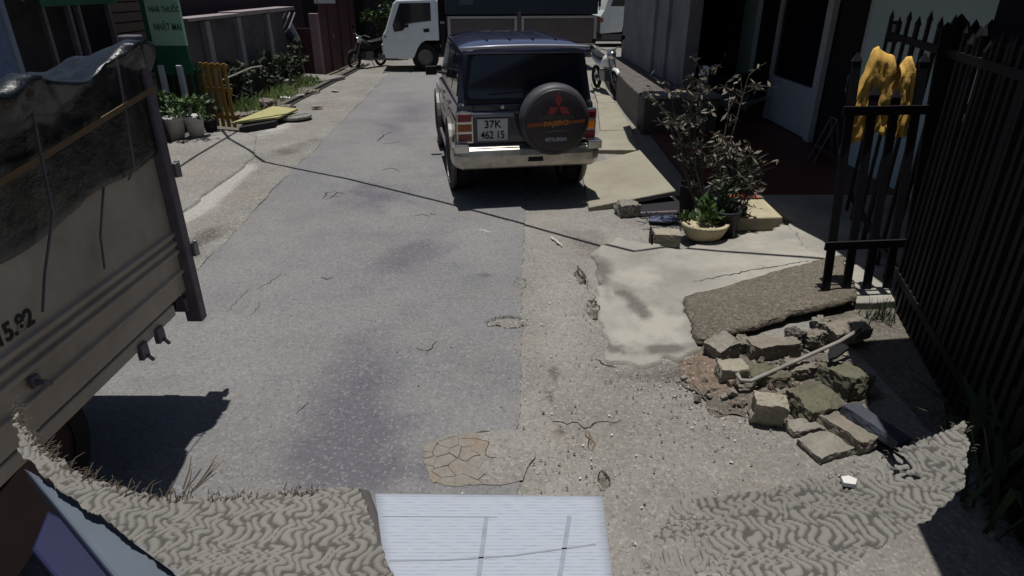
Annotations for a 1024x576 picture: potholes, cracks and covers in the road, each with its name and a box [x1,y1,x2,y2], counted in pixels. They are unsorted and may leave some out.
pothole [598,470,611,491]
pothole [487,315,524,329]
crack [552,419,622,451]
pothole [586,300,597,321]
